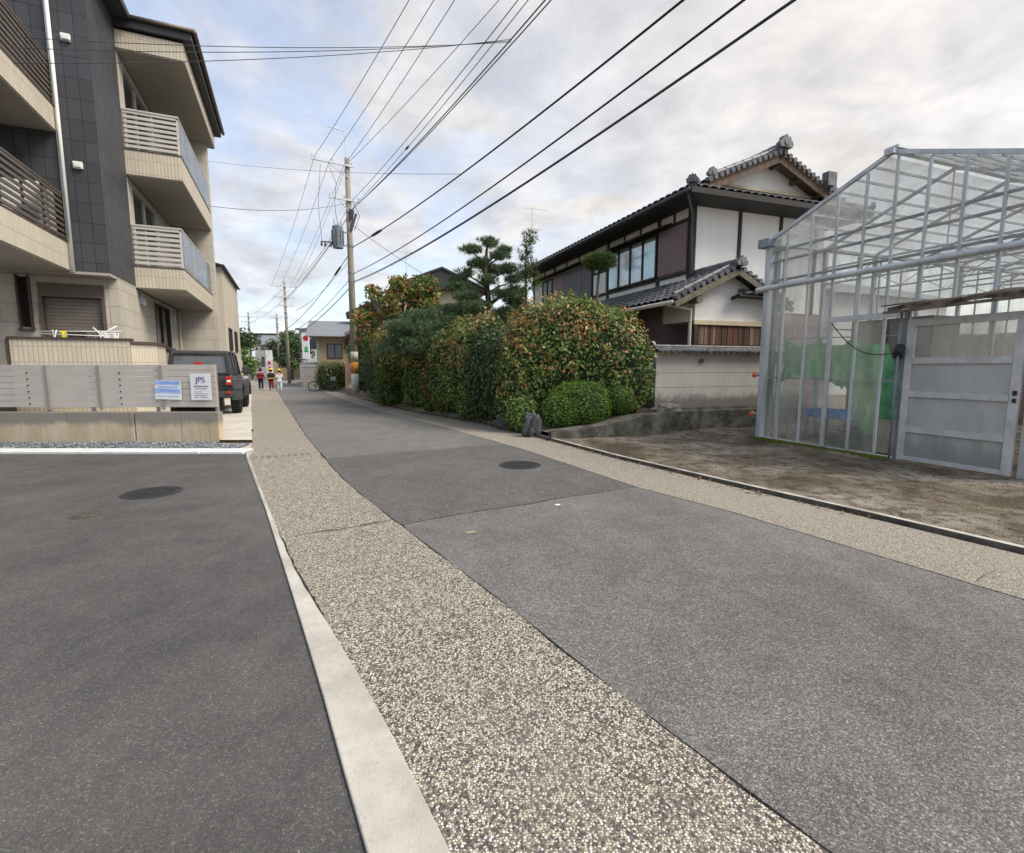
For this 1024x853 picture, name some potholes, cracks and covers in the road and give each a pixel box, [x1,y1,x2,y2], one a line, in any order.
manhole cover [499,461,541,469]
manhole cover [68,511,102,519]
manhole cover [119,486,183,499]
